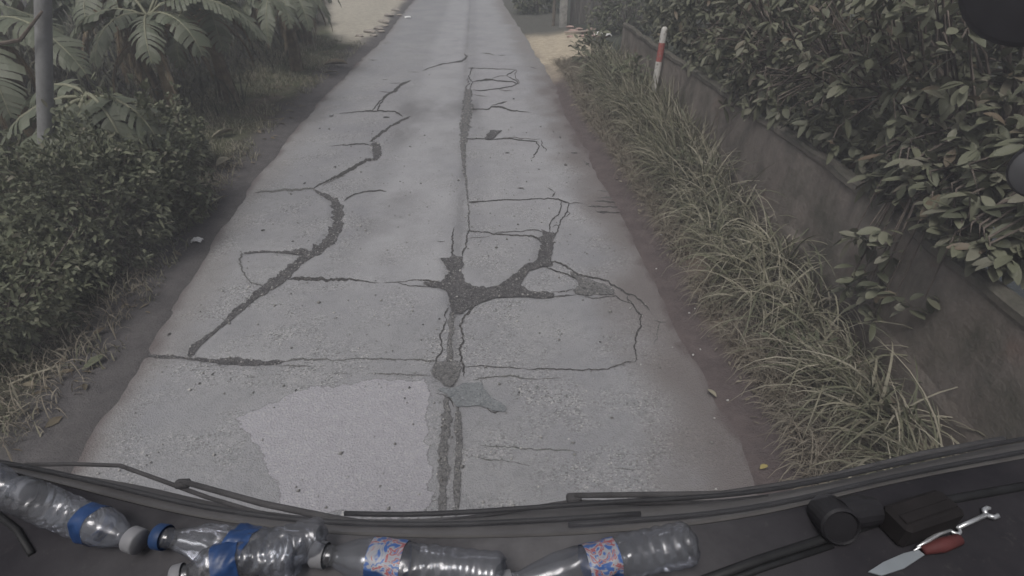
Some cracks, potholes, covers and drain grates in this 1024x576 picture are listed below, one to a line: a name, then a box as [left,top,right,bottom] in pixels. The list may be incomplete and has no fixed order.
crack [147,53,663,380]
crack [437,393,575,518]
